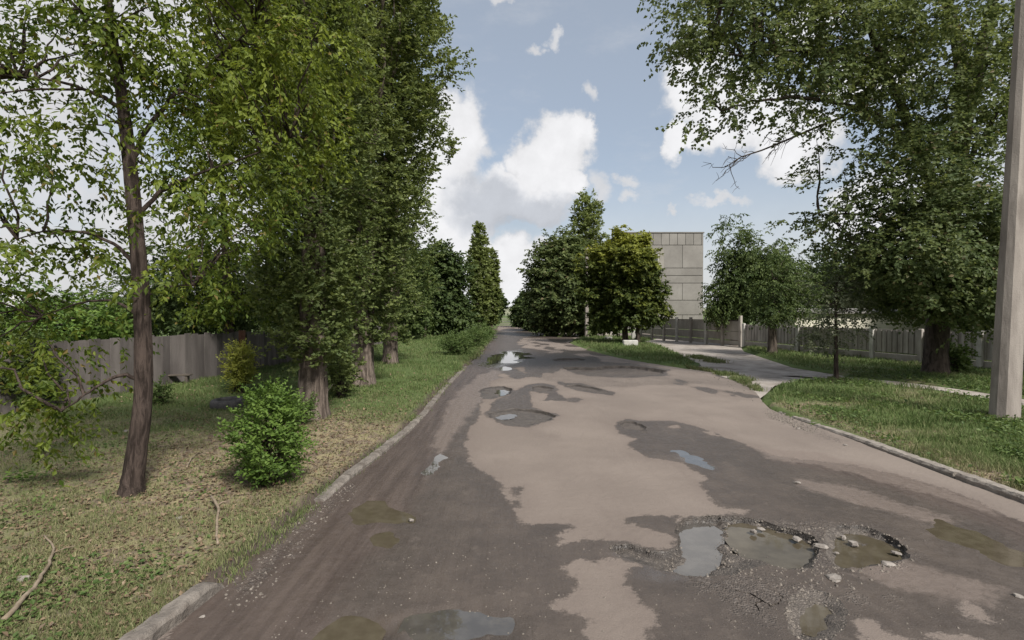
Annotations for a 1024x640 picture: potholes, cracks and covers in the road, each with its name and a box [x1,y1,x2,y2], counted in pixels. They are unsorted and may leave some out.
crack [723,587,784,611]
pothole [566,384,609,393]
pothole [478,386,512,399]
pothole [609,515,819,577]
pothole [785,589,848,640]
pothole [488,408,556,426]
pothole [823,524,910,569]
